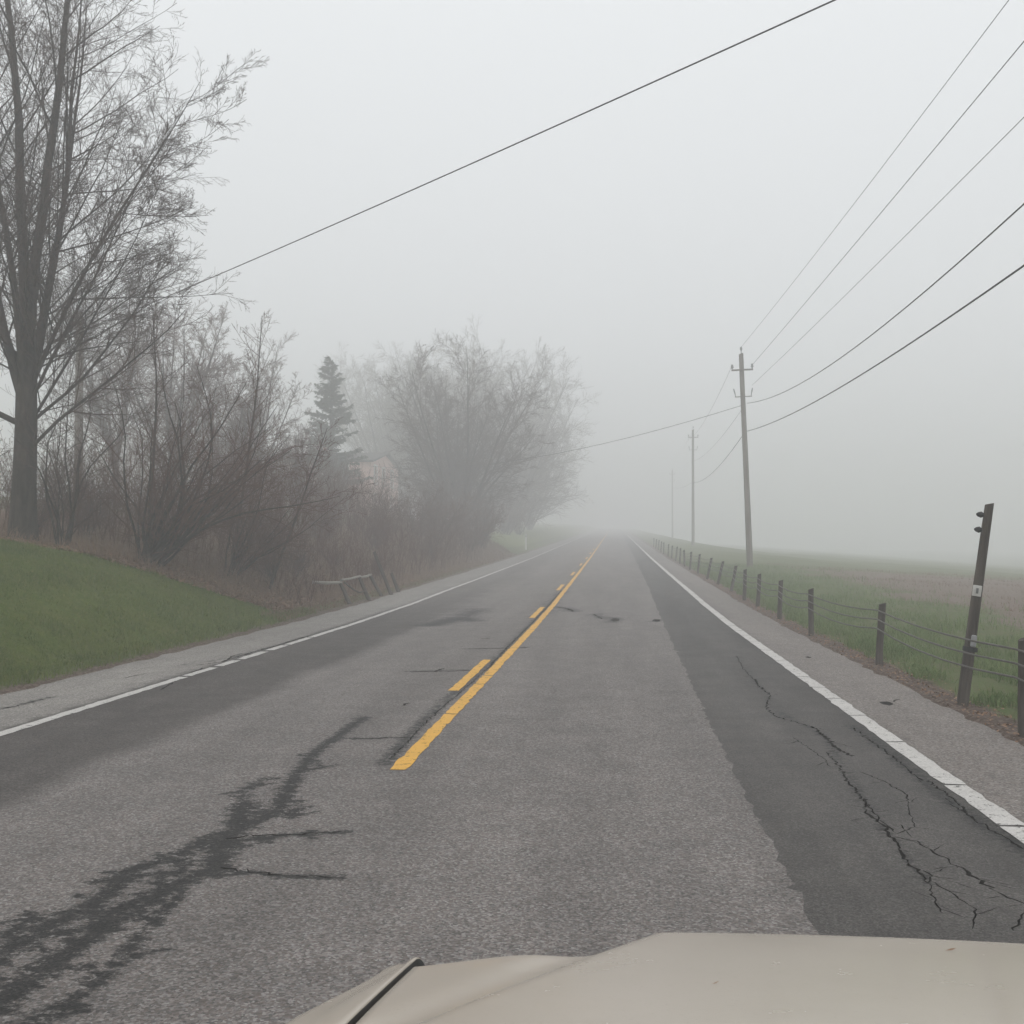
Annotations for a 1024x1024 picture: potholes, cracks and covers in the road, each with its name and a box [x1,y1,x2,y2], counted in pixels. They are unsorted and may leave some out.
crack [223,831,347,840]
crack [736,656,1024,931]
